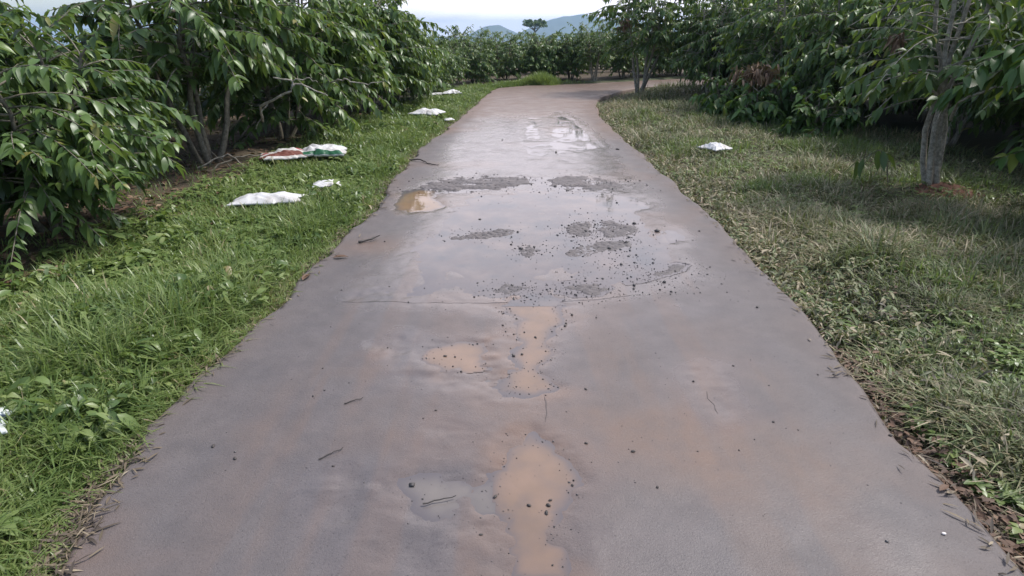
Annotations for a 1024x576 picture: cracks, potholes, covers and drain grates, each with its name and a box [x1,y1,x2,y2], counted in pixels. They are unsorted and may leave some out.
pothole [653,264,687,277]
pothole [566,241,632,257]
pothole [565,221,592,237]
pothole [451,229,515,240]
pothole [420,175,534,192]
pothole [547,176,625,191]
pothole [598,220,638,238]
